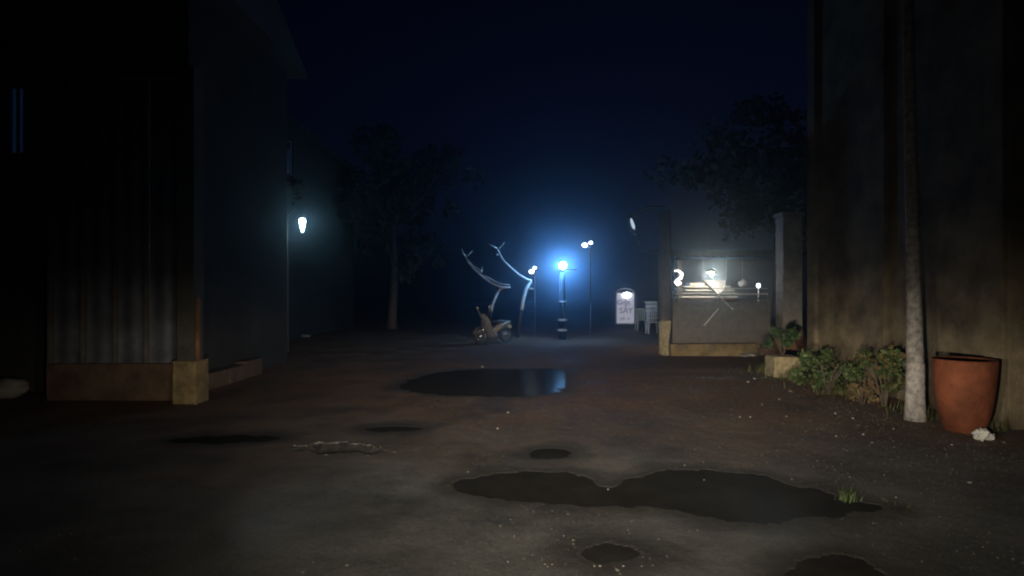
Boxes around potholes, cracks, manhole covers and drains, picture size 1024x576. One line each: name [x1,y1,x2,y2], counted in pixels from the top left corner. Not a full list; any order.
pothole [362,425,426,433]
pothole [399,368,569,398]
pothole [526,447,574,459]
pothole [165,434,283,444]
pothole [779,552,890,576]
pothole [576,541,645,566]
pothole [448,468,896,526]
